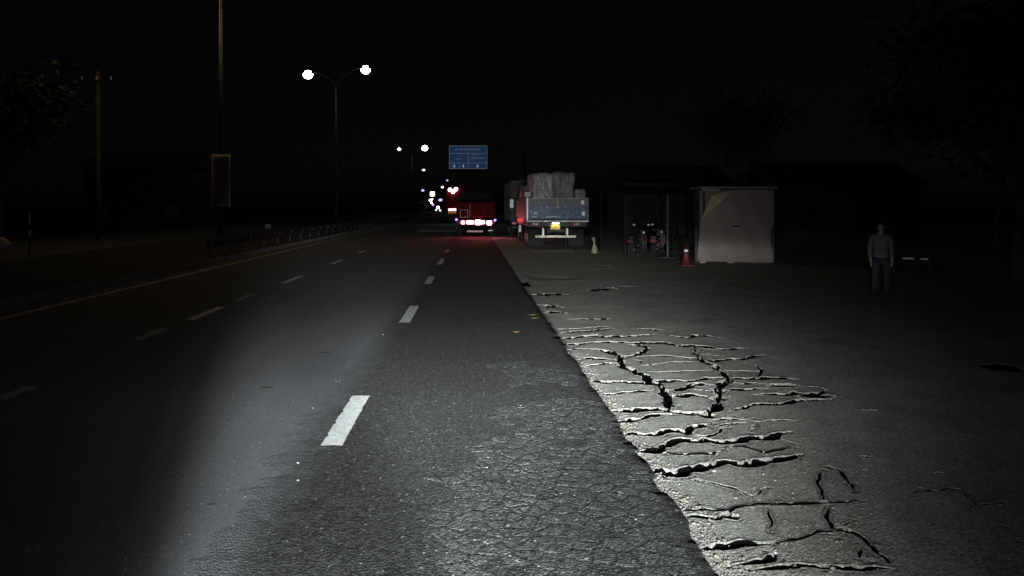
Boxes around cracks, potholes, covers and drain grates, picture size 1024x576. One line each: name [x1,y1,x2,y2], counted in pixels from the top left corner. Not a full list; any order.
crack [422,293,897,576]
crack [913,487,1001,508]
pothole [968,362,1024,374]
